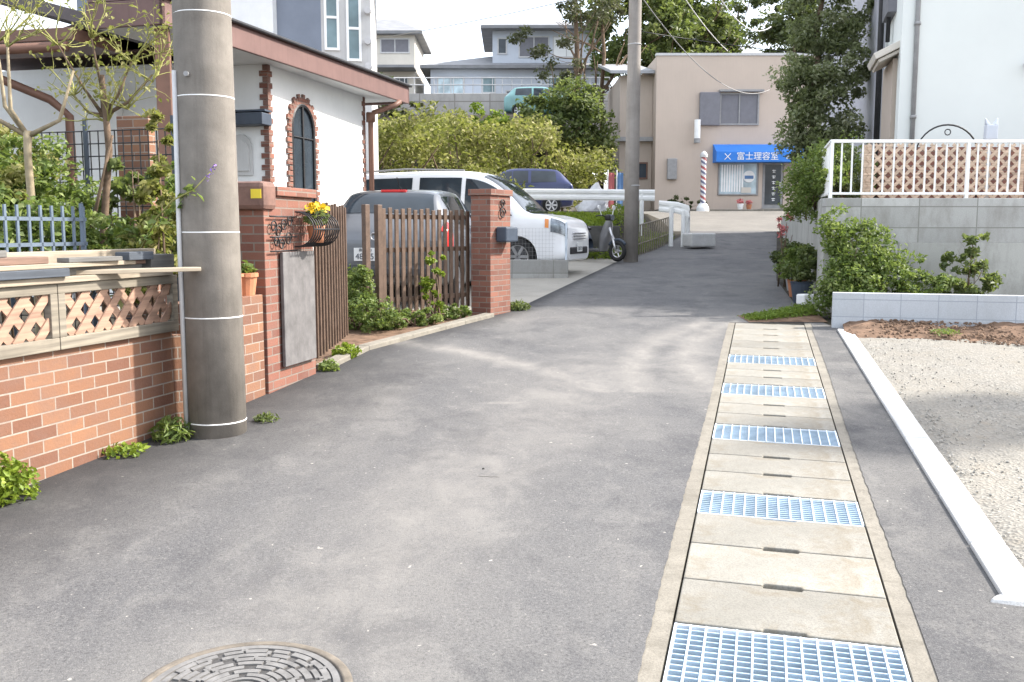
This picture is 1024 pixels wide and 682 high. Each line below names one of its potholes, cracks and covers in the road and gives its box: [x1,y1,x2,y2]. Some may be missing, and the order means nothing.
drain grate [712,423,840,447]
drain grate [697,490,864,527]
drain grate [663,623,911,682]
drain grate [721,383,826,399]
drain grate [728,354,816,366]
manhole cover [140,641,353,682]
